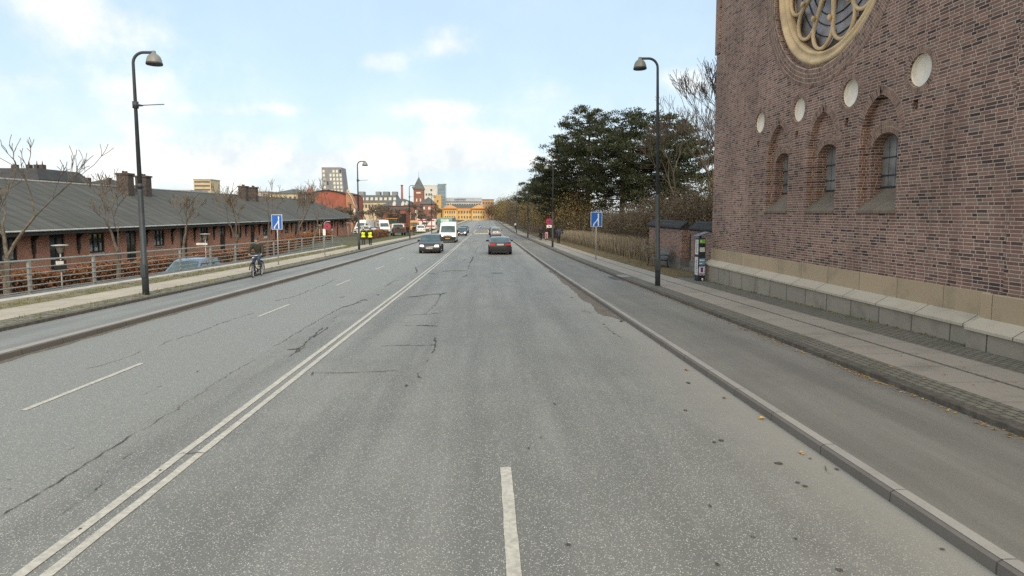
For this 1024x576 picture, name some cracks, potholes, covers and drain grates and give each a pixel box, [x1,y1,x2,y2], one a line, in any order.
crack [389,280,444,377]
crack [274,299,366,357]
